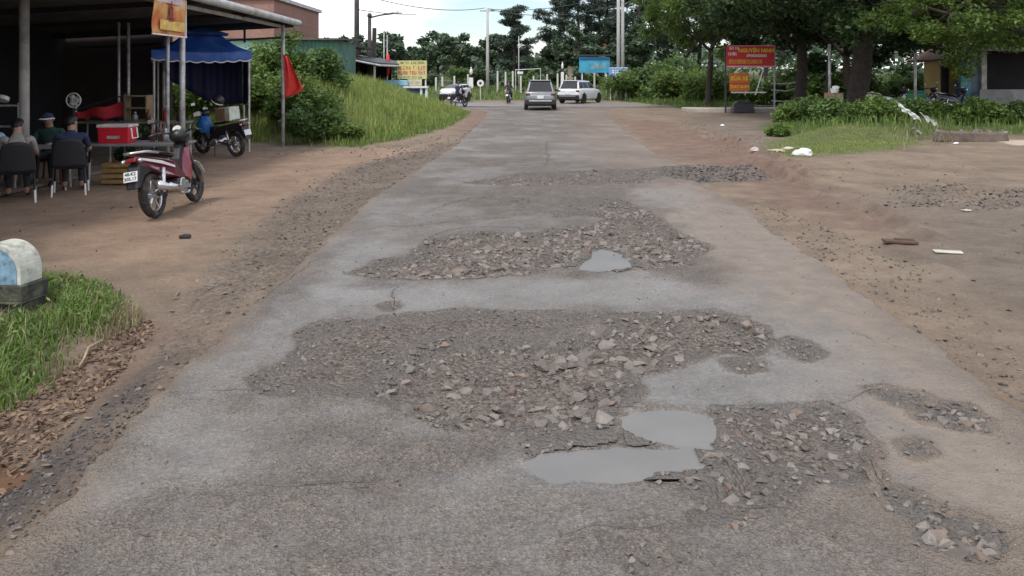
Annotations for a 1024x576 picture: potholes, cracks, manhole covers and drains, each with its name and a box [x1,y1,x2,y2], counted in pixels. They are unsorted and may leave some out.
crack [388,286,400,313]
pothole [903,437,932,456]
pothole [680,439,822,511]
pothole [464,167,664,186]
pothole [659,164,757,182]
pothole [348,199,710,280]
pothole [706,404,889,490]
pothole [370,310,776,436]
pothole [915,399,993,433]
crack [833,390,874,406]
crack [488,141,582,167]
